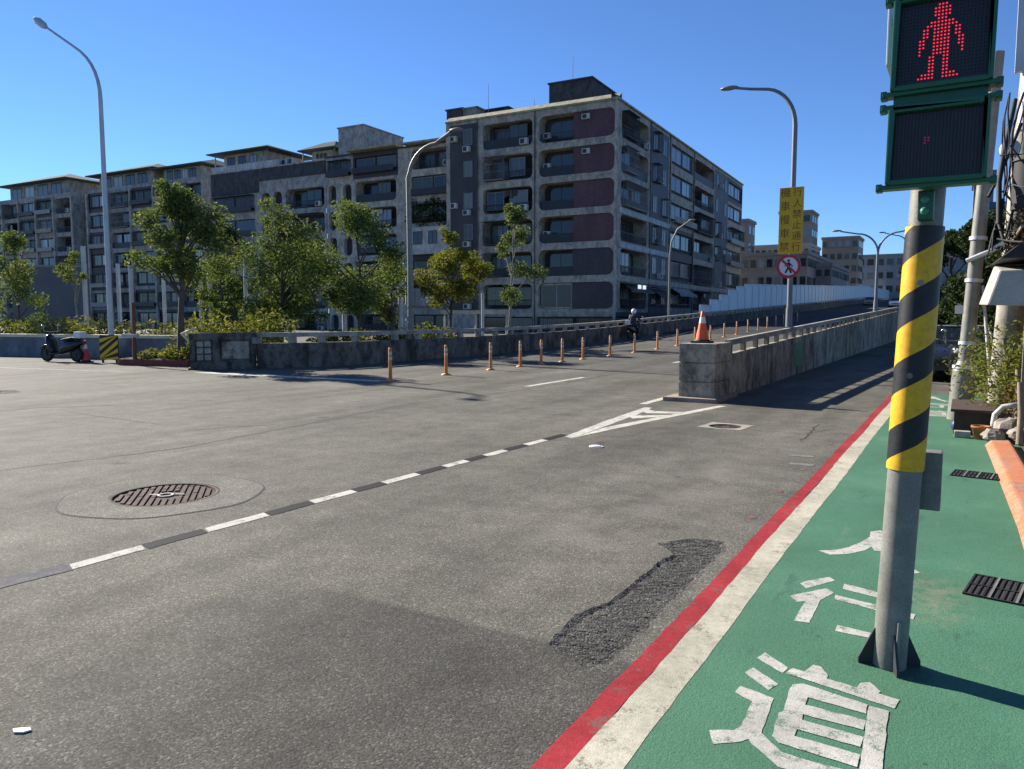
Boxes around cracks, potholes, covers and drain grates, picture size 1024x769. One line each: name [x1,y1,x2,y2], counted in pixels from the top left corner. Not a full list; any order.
manhole cover [697,422,754,430]
manhole cover [55,475,265,519]
drain grate [950,469,1000,481]
crack [751,424,830,442]
drain grate [962,573,1024,606]
